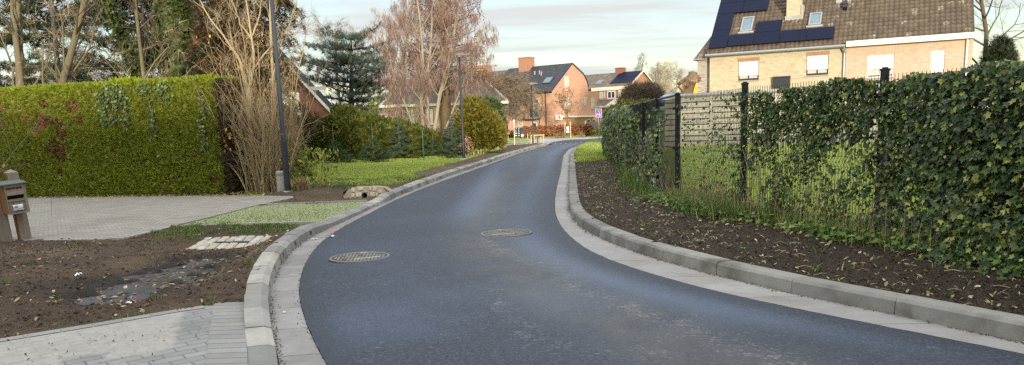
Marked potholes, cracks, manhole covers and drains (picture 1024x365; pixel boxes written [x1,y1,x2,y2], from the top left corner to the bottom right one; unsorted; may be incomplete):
manhole cover [481,229,532,237]
manhole cover [329,251,390,263]
